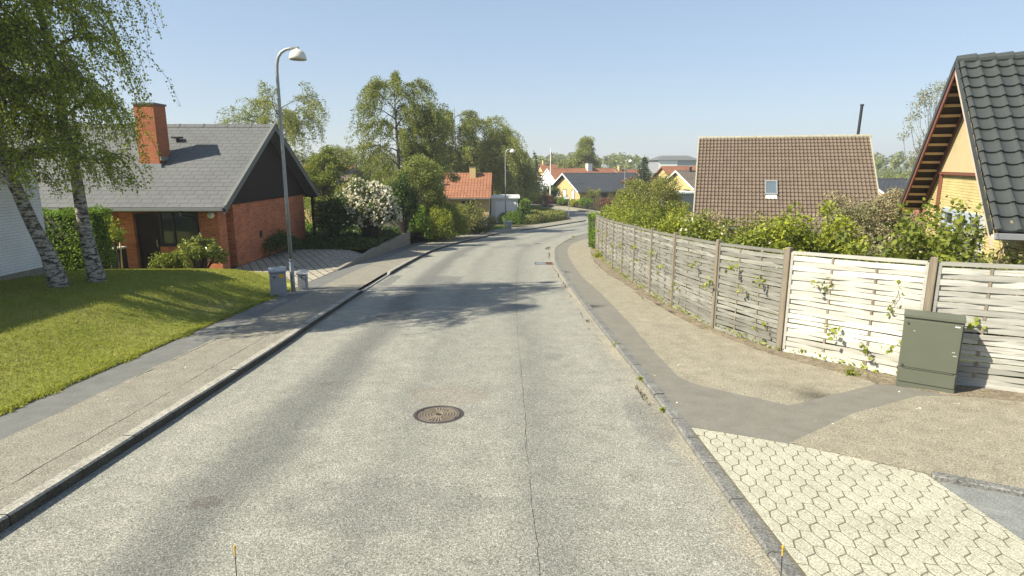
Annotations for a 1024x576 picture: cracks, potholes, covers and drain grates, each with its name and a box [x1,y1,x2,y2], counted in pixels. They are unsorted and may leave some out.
manhole cover [413,405,464,424]
crack [516,260,540,576]
